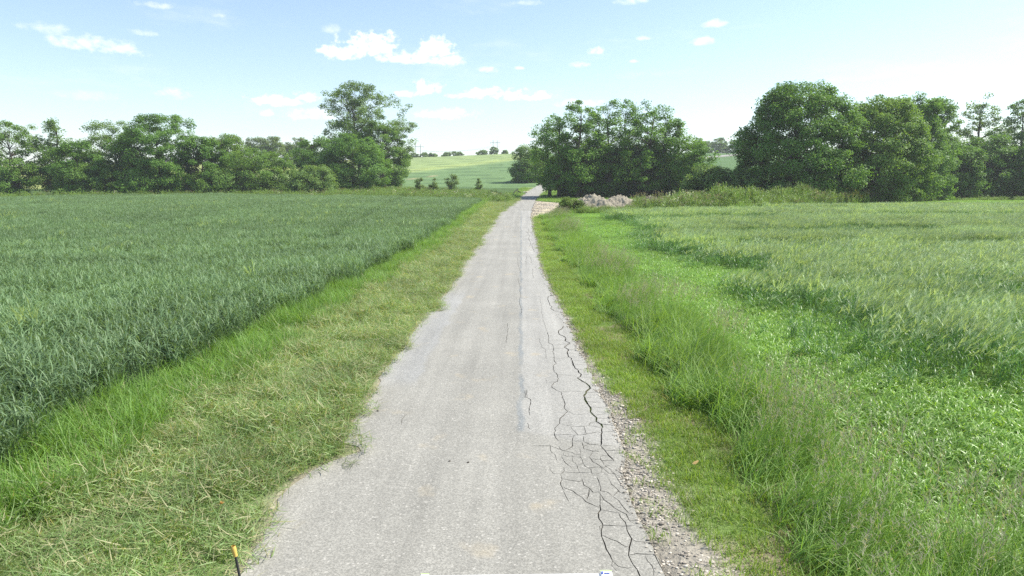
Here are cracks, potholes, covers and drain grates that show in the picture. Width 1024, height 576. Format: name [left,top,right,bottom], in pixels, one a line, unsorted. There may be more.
crack [506,228,663,576]
